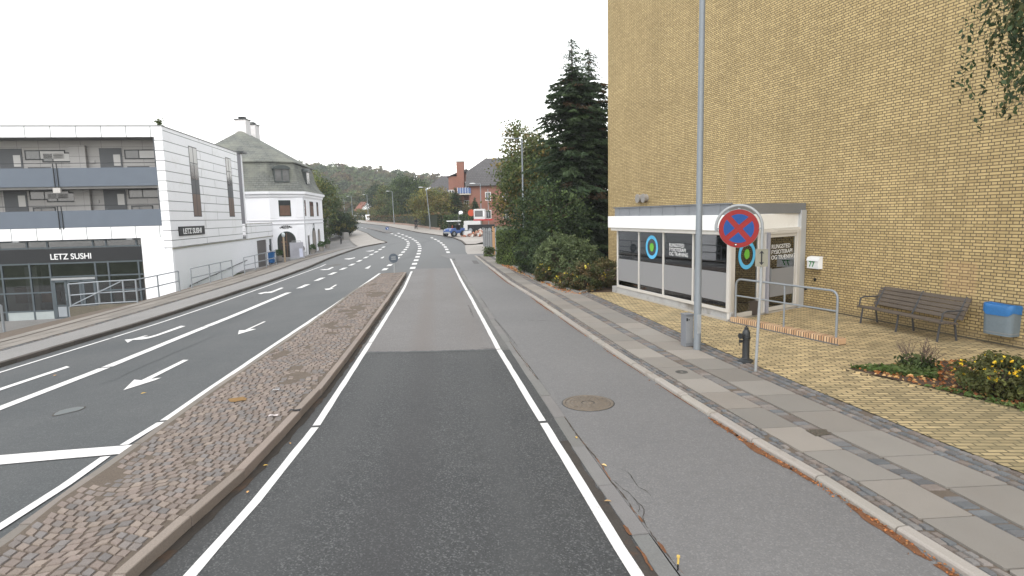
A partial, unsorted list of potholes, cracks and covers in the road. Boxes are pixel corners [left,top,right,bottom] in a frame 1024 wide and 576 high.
manhole cover [562,395,615,412]
manhole cover [52,406,86,416]
